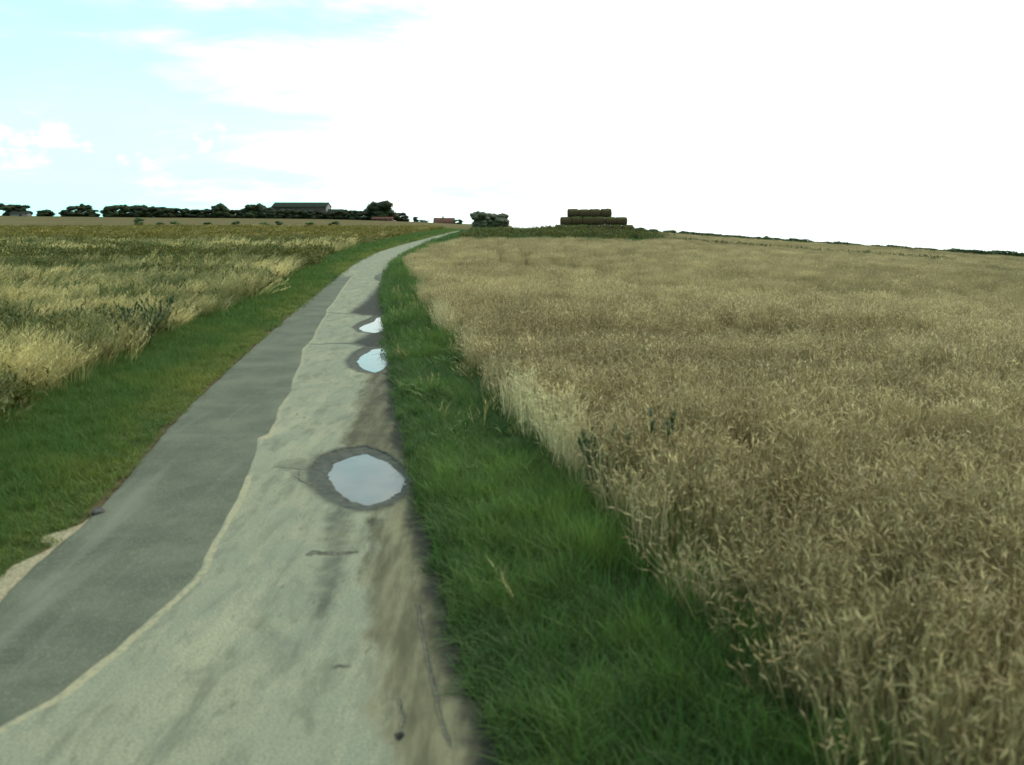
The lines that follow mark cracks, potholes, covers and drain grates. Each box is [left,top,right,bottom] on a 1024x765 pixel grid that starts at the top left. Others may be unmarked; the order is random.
pothole [347,345,390,373]
pothole [308,445,412,511]
crack [397,603,452,748]
pothole [354,315,384,333]
